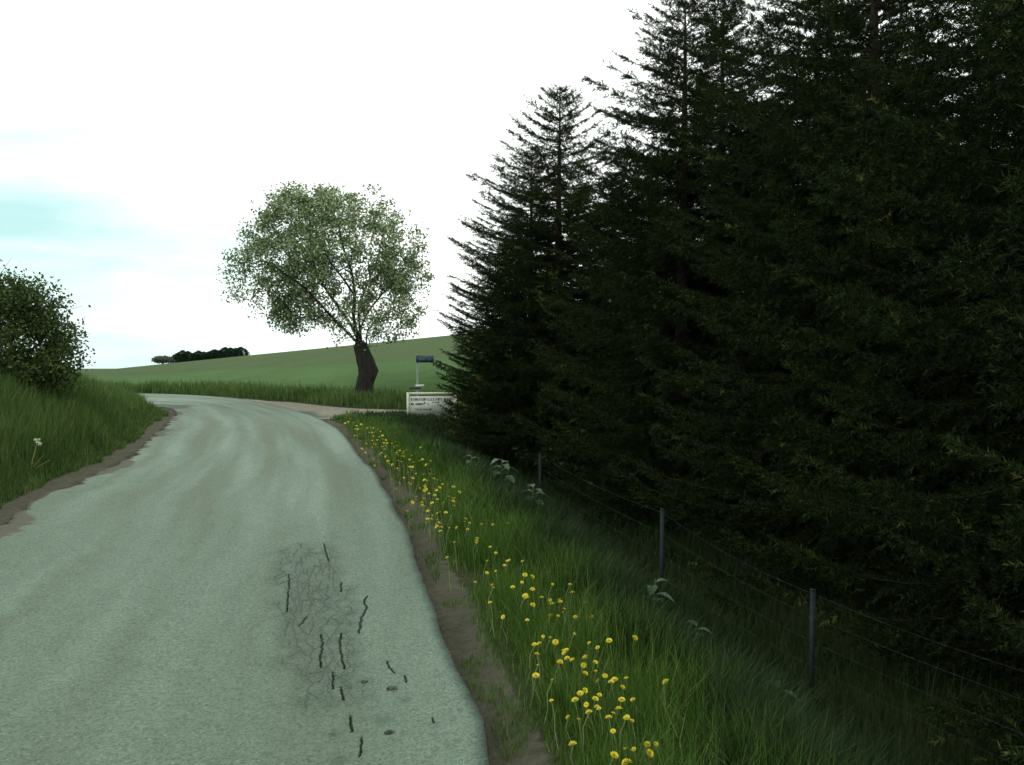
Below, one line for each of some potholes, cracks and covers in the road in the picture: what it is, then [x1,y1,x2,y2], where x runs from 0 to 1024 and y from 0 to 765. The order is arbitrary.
crack [273,544,368,757]
